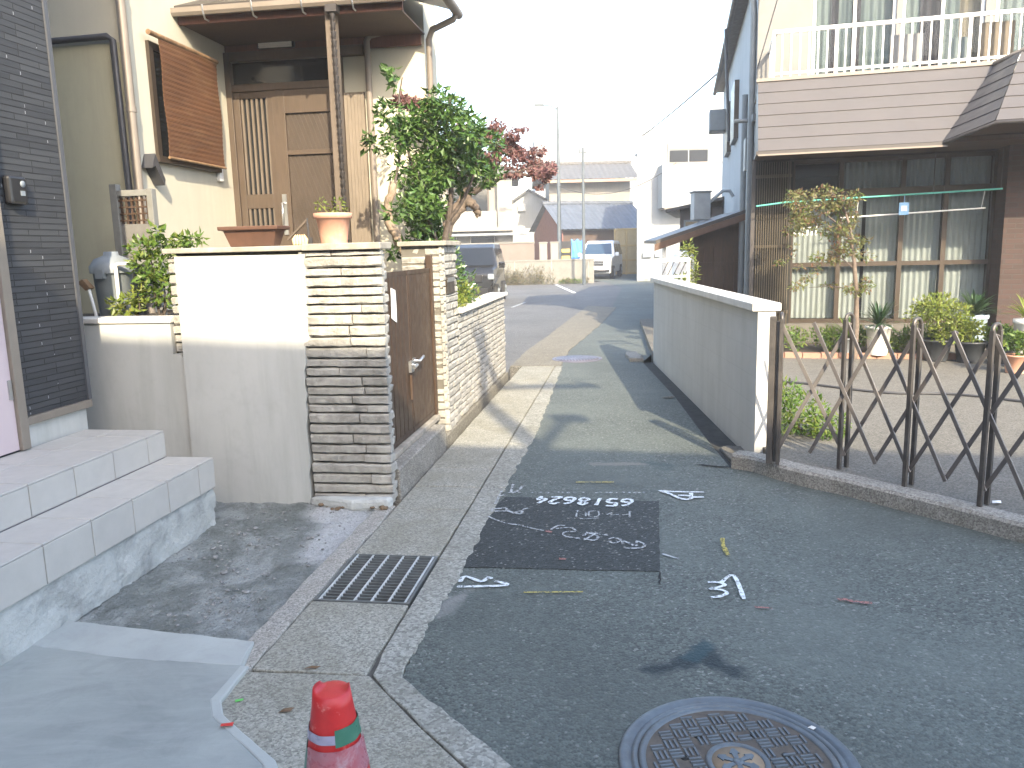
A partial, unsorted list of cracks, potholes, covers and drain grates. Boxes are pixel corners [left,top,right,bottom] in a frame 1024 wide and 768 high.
drain grate [313,553,438,609]
manhole cover [618,696,861,768]
manhole cover [552,355,603,363]
